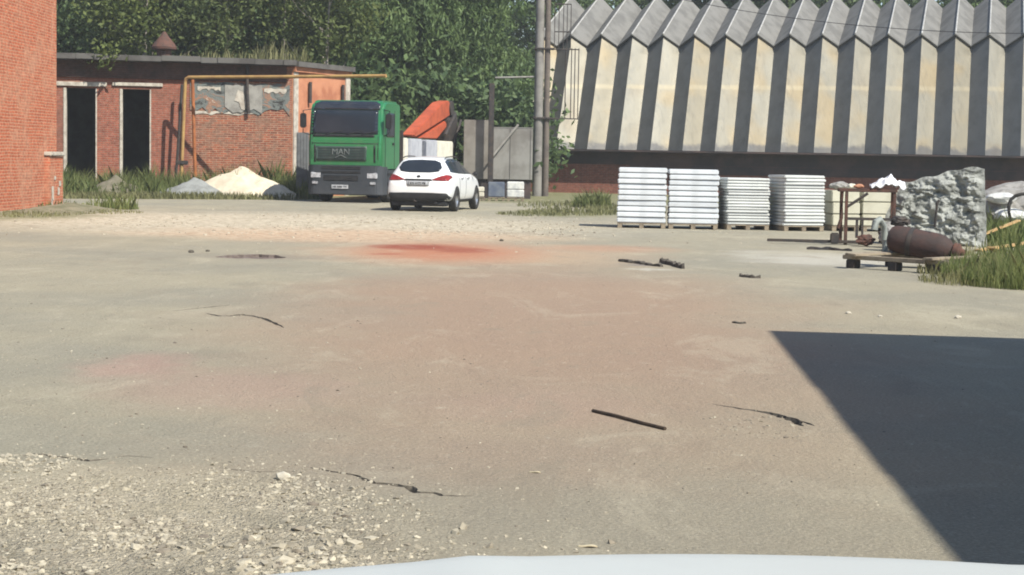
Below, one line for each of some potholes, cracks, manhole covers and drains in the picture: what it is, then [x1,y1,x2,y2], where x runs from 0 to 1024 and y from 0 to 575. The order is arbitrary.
crack [177,305,284,328]
crack [309,467,455,496]
crack [715,404,815,426]
